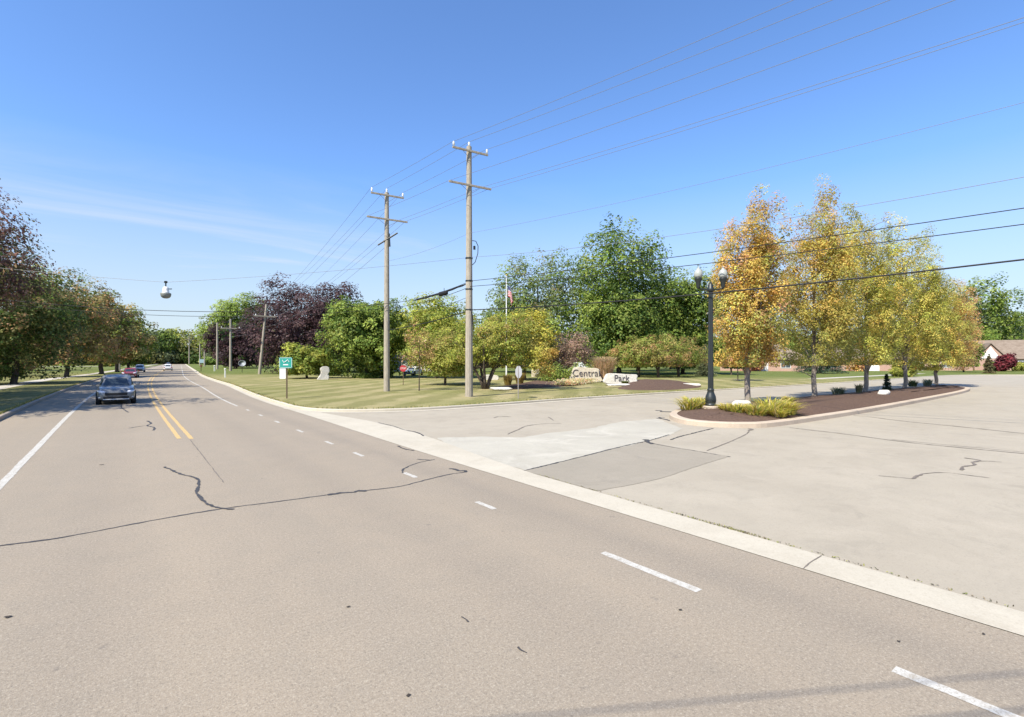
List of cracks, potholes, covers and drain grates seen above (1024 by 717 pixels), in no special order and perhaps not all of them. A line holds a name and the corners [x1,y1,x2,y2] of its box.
crack [656,410,753,450]
crack [879,458,998,479]
